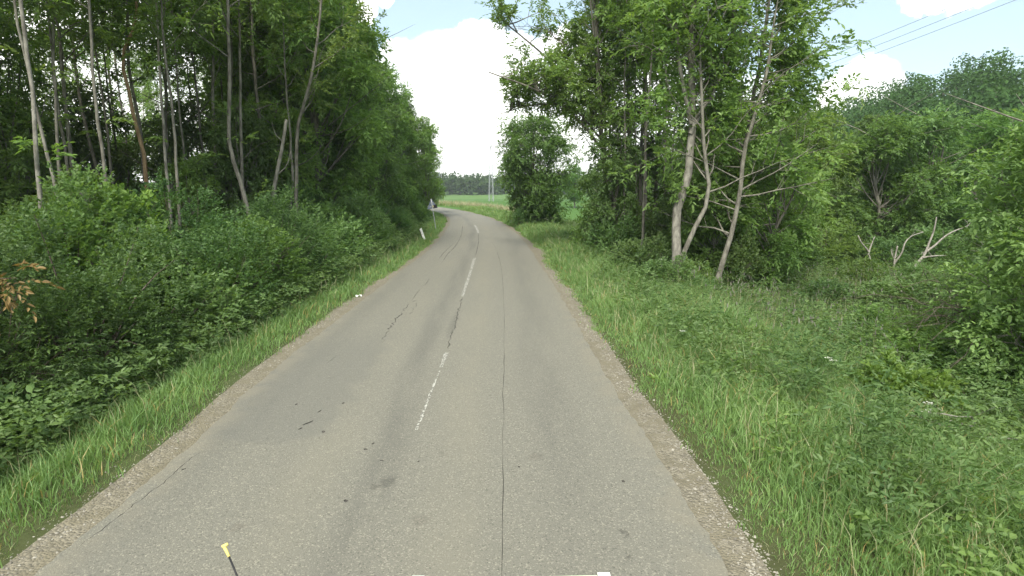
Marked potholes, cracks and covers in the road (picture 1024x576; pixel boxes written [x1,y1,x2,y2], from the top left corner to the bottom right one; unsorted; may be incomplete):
crack [441,226,505,576]
crack [77,457,192,548]
